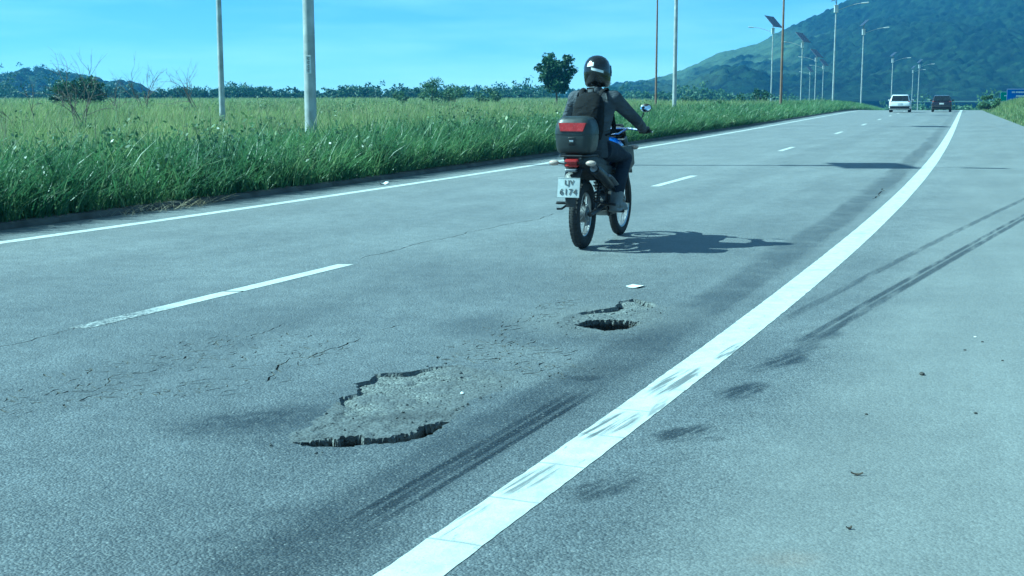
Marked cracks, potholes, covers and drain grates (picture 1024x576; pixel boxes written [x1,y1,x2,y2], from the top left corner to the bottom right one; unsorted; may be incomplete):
crack [431,298,595,380]
pothole [269,362,515,454]
pothole [554,298,667,335]
crack [0,333,351,416]
